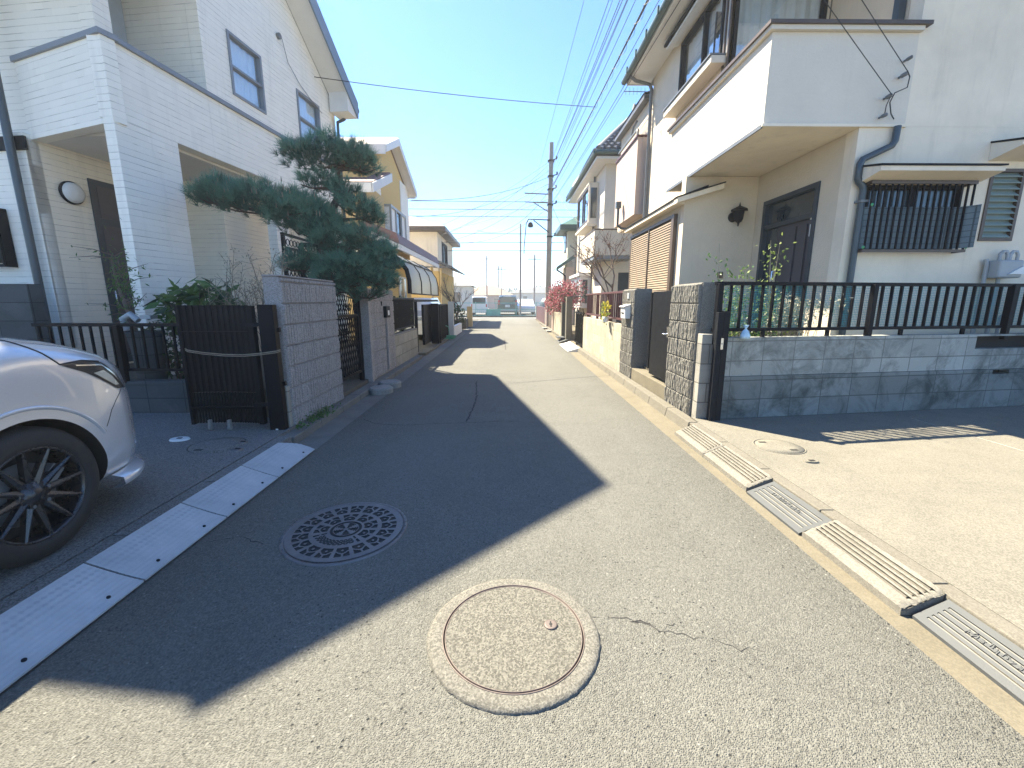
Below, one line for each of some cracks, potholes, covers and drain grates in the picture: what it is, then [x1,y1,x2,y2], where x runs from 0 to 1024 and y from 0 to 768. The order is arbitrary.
crack [364,382,511,425]
manhole cover [752,439,807,455]
manhole cover [427,579,601,716]
manhole cover [279,502,407,567]
crack [591,616,761,651]
manhole cover [185,436,248,454]
